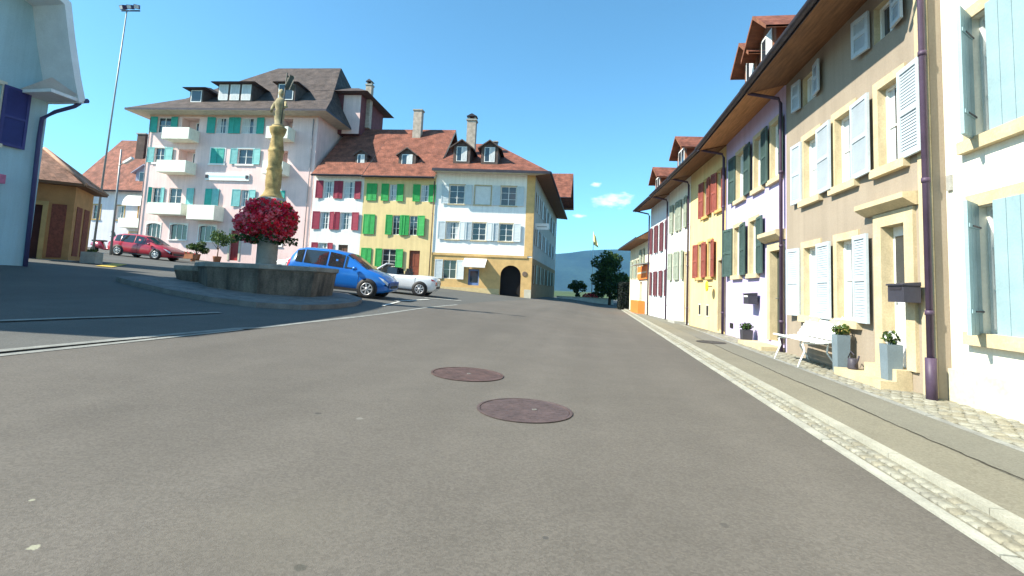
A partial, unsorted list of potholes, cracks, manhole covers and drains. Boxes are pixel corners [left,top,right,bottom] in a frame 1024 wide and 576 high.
manhole cover [477,398,573,423]
manhole cover [431,367,504,382]
